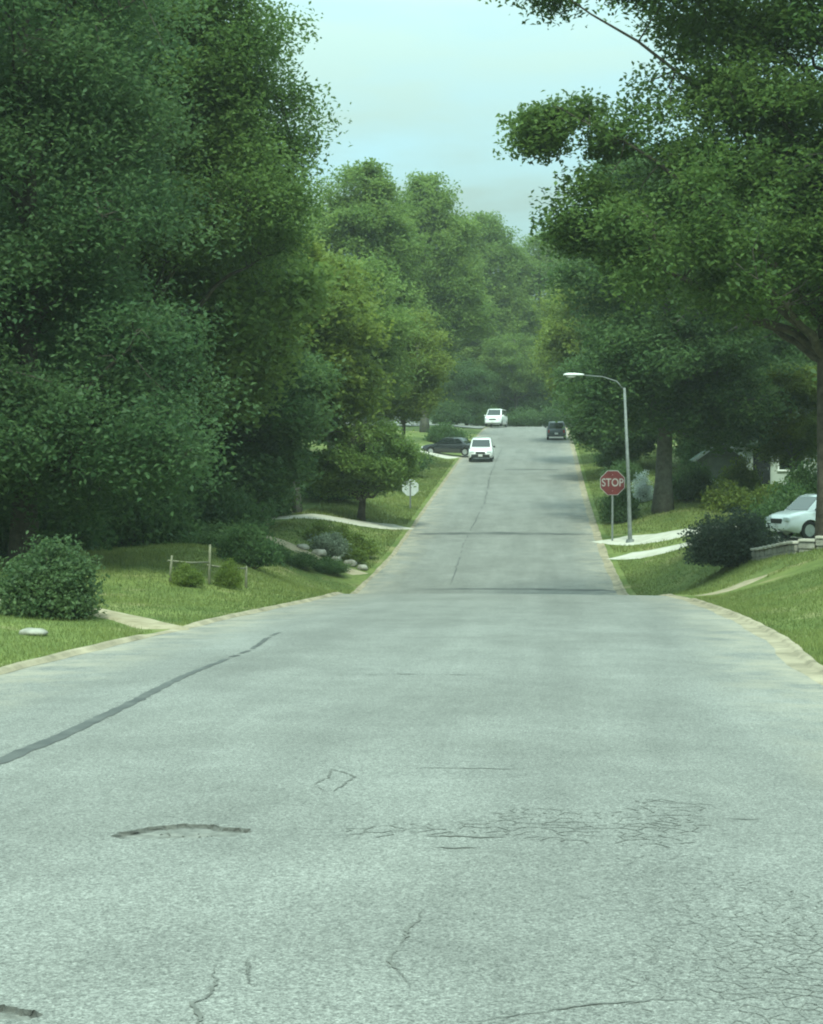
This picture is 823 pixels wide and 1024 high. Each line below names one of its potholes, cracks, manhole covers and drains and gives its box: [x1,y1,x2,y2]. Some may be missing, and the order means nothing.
pothole [0,1004,43,1021]
crack [579,854,823,1024]
crack [189,965,220,1024]
pothole [111,823,252,839]
crack [484,998,675,1020]
crack [312,769,357,791]
crack [386,909,422,986]
crack [245,957,255,986]
